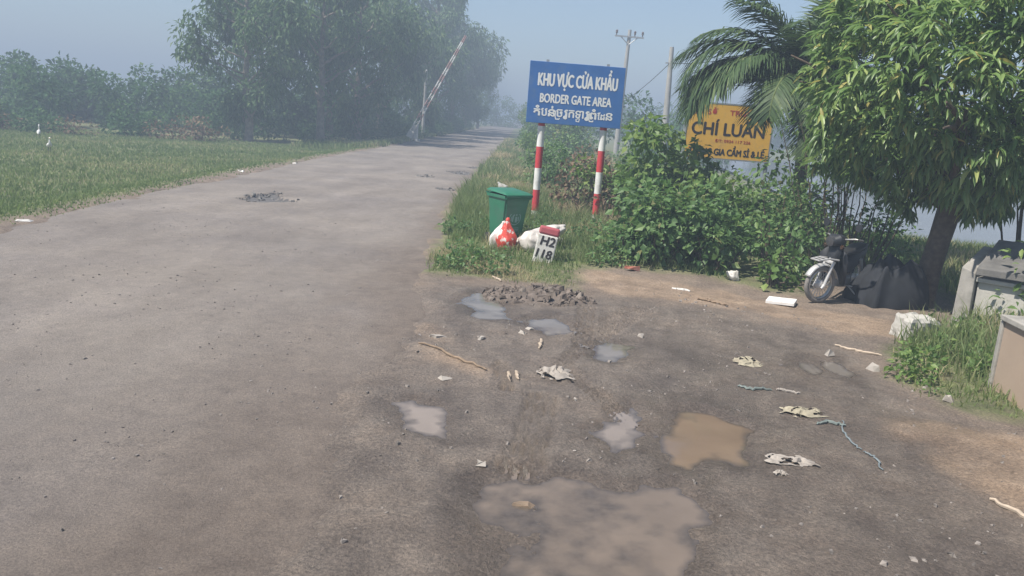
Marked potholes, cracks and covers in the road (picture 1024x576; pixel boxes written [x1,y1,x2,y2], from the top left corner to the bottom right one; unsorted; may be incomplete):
pothole [239,191,300,202]
